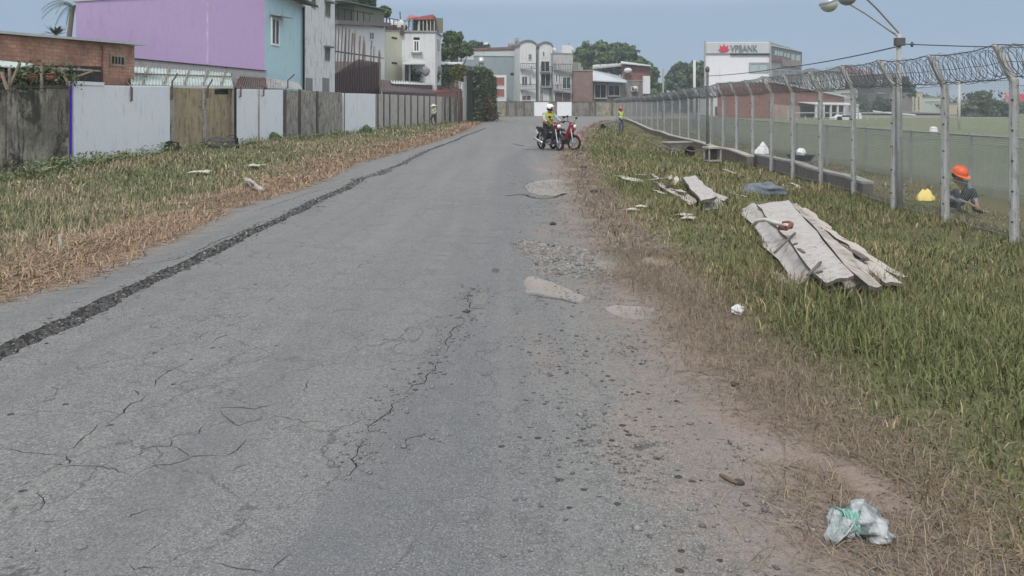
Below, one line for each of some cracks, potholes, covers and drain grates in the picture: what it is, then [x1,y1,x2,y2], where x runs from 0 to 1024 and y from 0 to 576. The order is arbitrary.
crack [5,481,61,522]
crack [212,552,292,572]
pothole [512,239,646,280]
crack [0,128,486,476]
